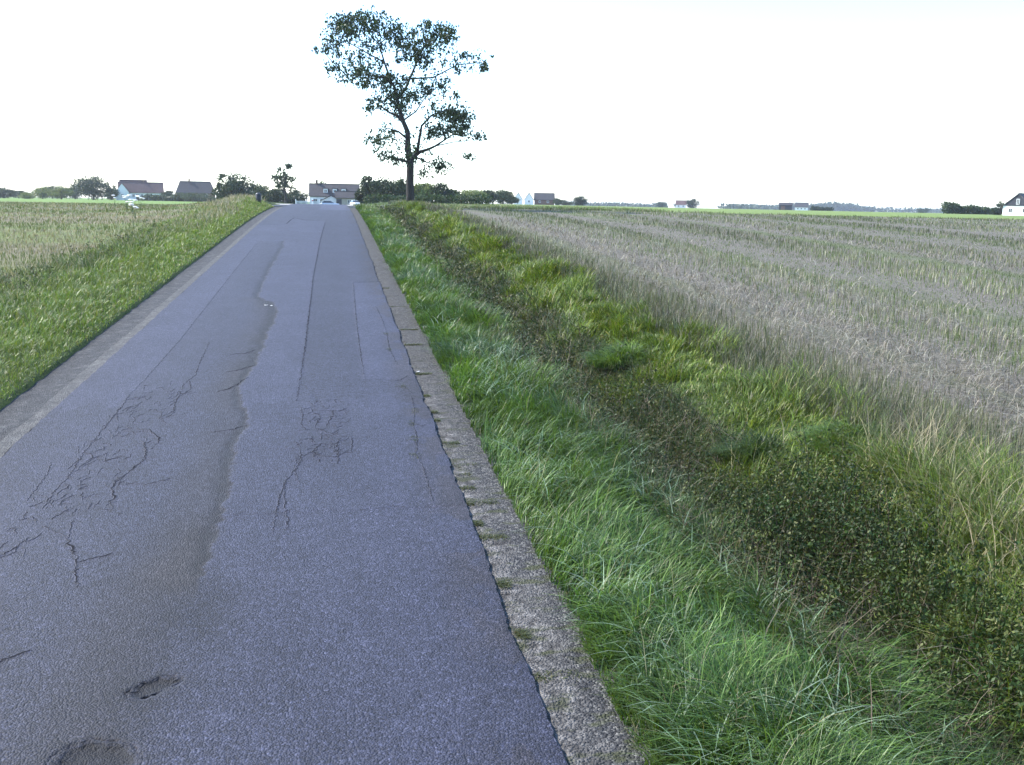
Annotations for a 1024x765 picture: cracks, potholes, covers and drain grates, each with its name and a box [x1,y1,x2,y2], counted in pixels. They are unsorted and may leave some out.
crack [0,341,257,586]
pothole [47,738,143,765]
crack [375,306,434,501]
pothole [126,676,184,700]
crack [271,399,355,532]
